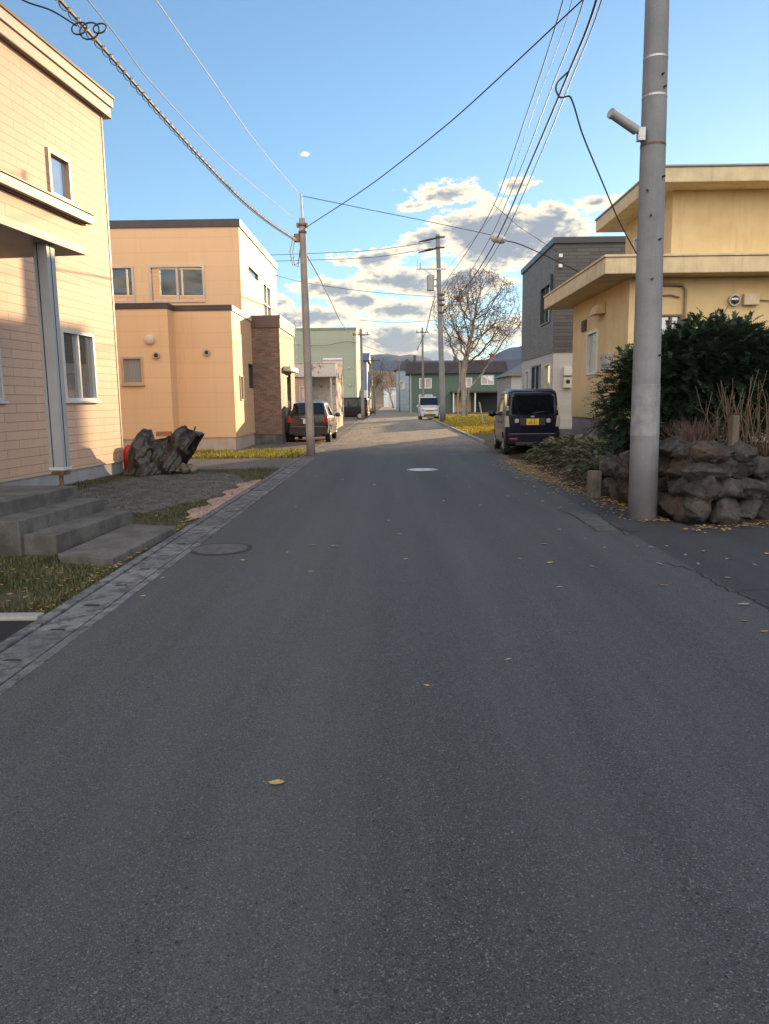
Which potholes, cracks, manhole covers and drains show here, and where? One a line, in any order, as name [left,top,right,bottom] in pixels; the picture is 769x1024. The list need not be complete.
manhole cover [190,543,253,555]
crack [658,562,769,611]
crack [558,505,641,535]
